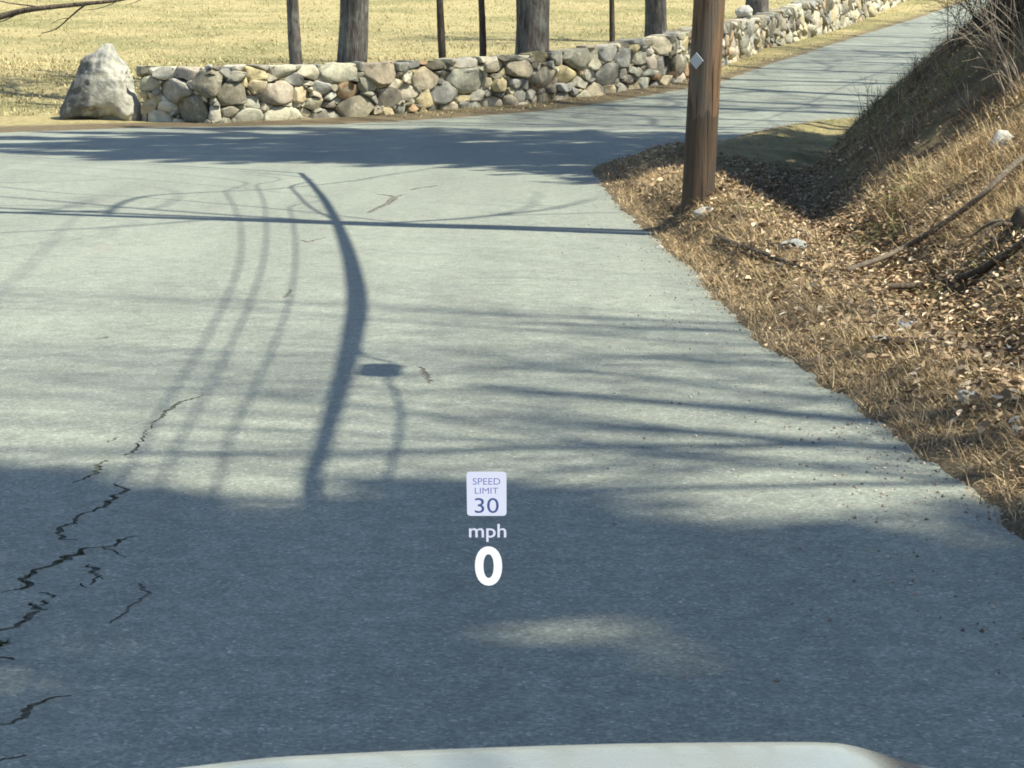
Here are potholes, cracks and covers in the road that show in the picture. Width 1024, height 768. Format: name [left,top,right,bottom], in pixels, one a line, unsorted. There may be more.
crack [0,394,206,660]
crack [367,185,437,213]
crack [0,695,72,725]
